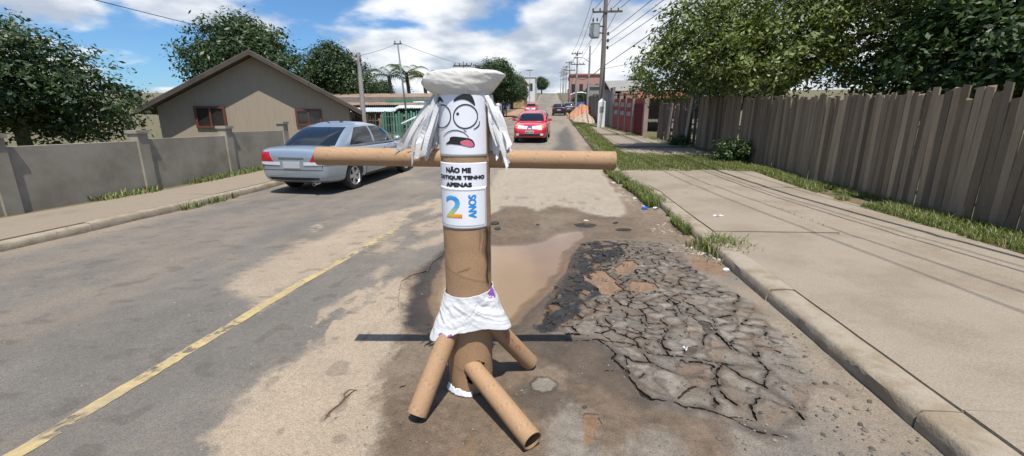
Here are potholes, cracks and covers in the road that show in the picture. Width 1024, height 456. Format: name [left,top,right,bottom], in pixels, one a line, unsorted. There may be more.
pothole [398,225,621,345]
crack [545,240,805,437]
